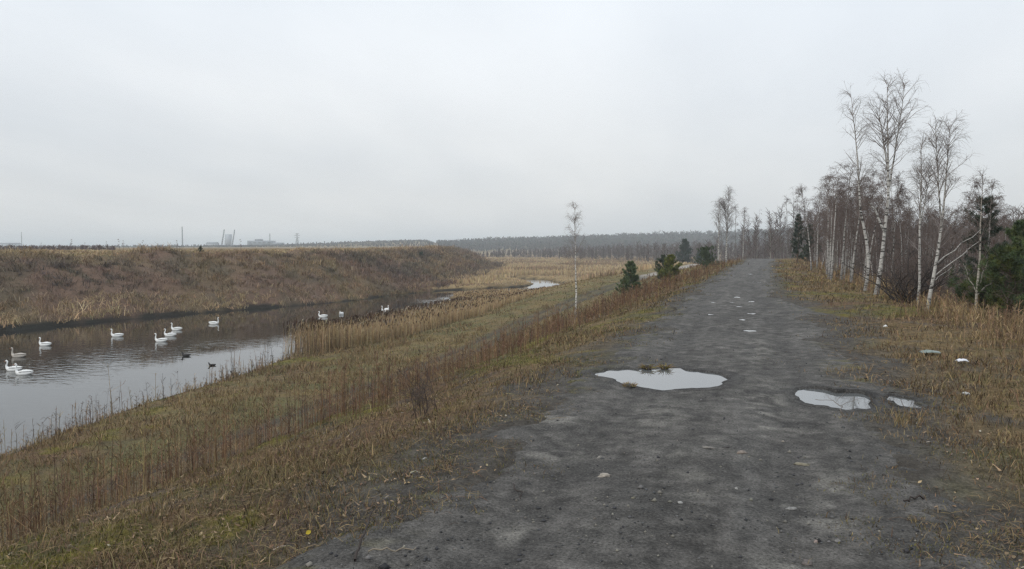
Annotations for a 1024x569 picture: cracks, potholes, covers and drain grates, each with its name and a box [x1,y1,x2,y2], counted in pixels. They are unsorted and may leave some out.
pothole [880,393,928,410]
pothole [784,384,887,412]
pothole [579,365,745,394]
